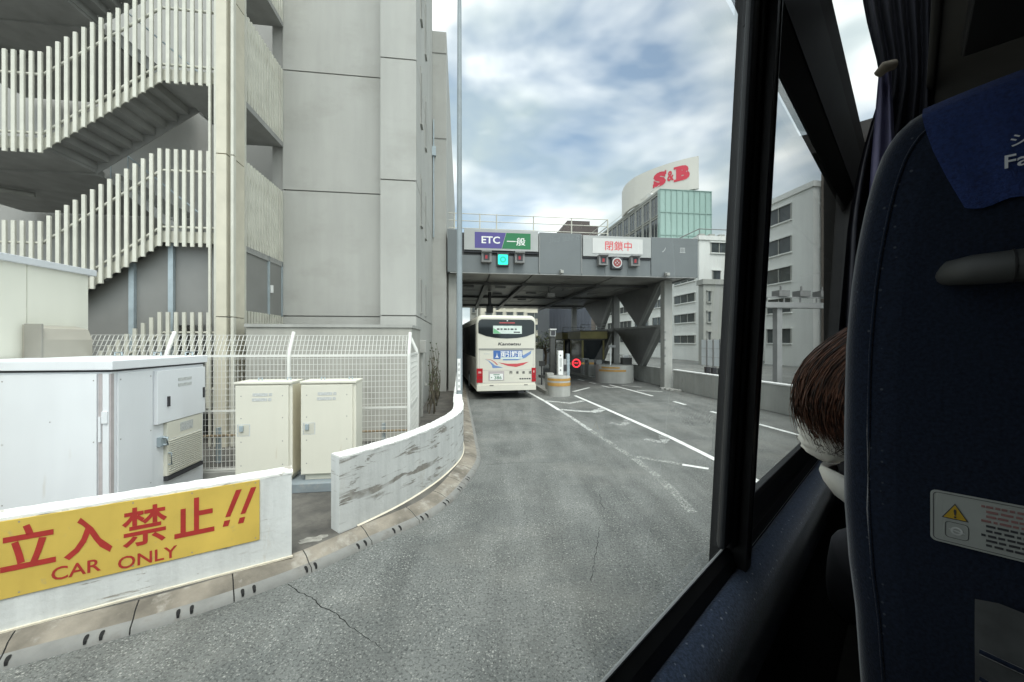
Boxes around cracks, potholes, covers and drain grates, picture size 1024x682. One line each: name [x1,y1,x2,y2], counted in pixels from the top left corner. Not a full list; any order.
crack [288,584,383,651]
